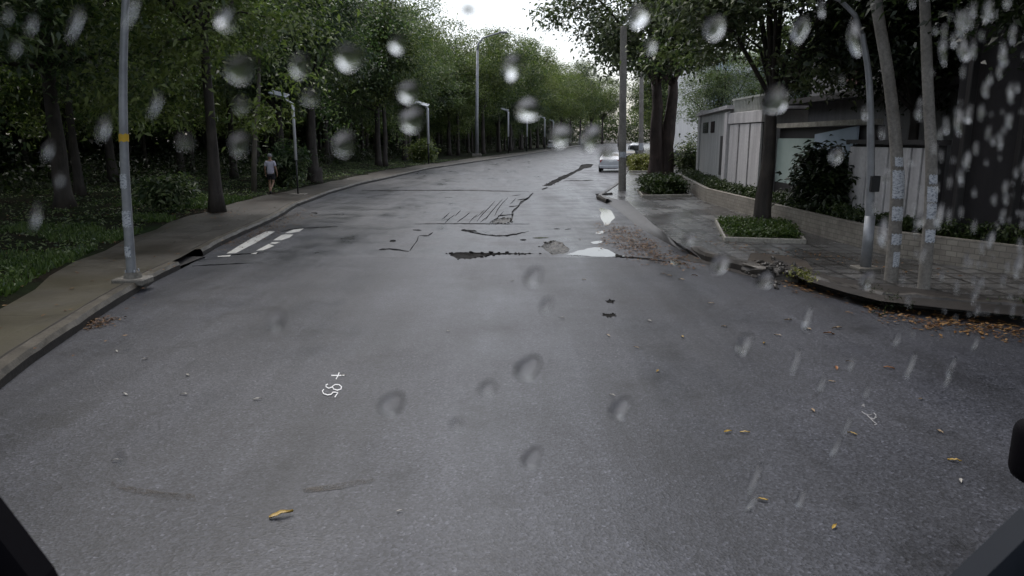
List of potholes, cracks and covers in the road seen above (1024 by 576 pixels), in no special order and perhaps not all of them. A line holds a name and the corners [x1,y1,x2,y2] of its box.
pothole [538,240,570,255]
pothole [446,251,542,260]
drain grate [174,256,205,269]
crack [362,190,533,252]
